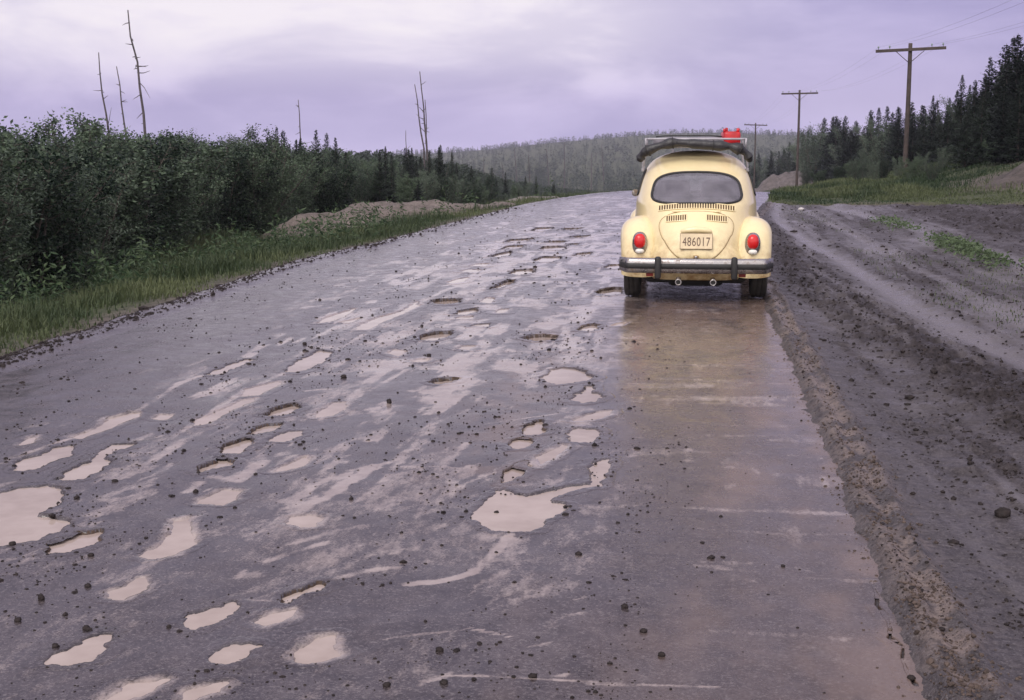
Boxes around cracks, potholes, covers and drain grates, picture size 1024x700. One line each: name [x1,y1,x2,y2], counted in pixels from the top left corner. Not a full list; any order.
pothole [456,455,624,537]
pothole [179,453,247,476]
pothole [0,482,86,550]
pothole [29,526,116,558]
pothole [523,255,571,263]
pothole [253,400,313,418]
pothole [195,636,275,671]
pothole [555,425,613,445]
pothole [508,418,559,439]
pothole [162,594,256,637]
pothole [206,434,269,459]
pothole [530,365,607,387]
